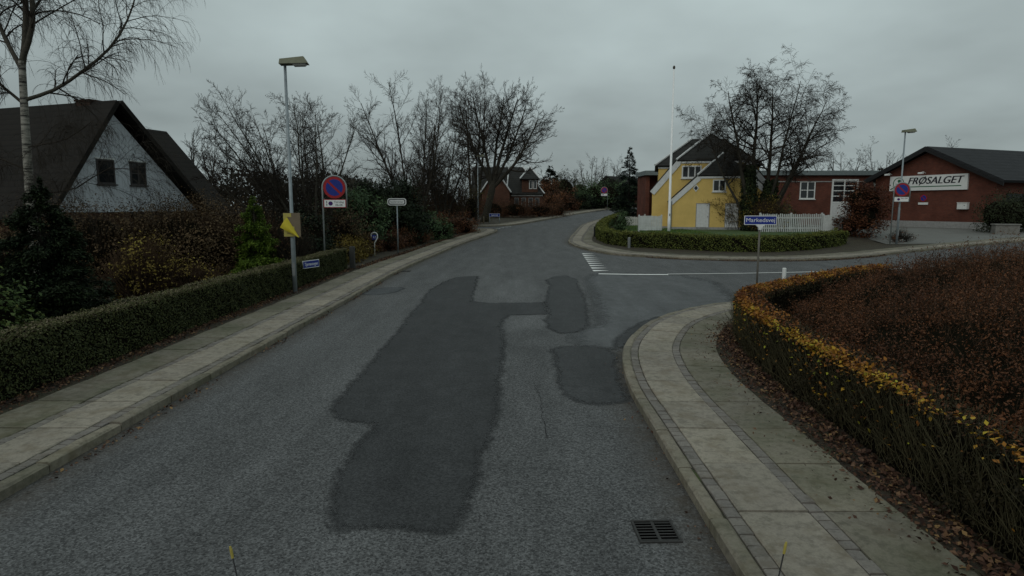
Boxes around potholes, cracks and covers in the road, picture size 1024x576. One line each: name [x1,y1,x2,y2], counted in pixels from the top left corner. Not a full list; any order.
drain grate [630,519,683,544]
